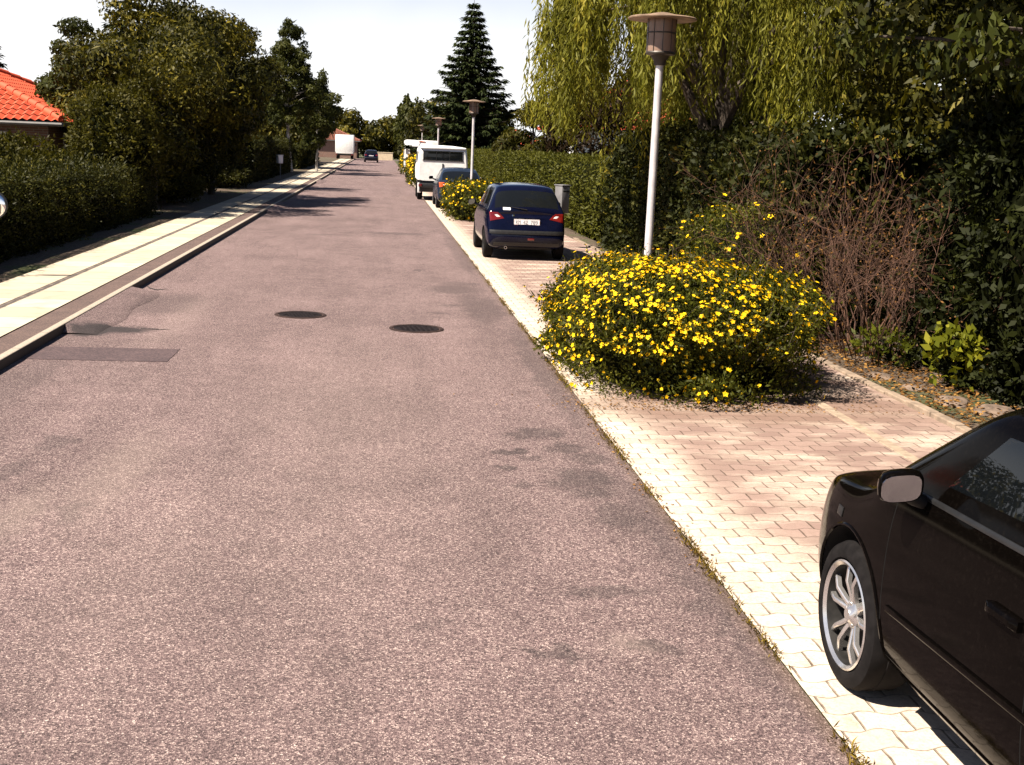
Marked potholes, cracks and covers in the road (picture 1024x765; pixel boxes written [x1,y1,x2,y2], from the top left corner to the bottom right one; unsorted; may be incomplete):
manhole cover [274,311,326,319]
manhole cover [389,324,444,333]
